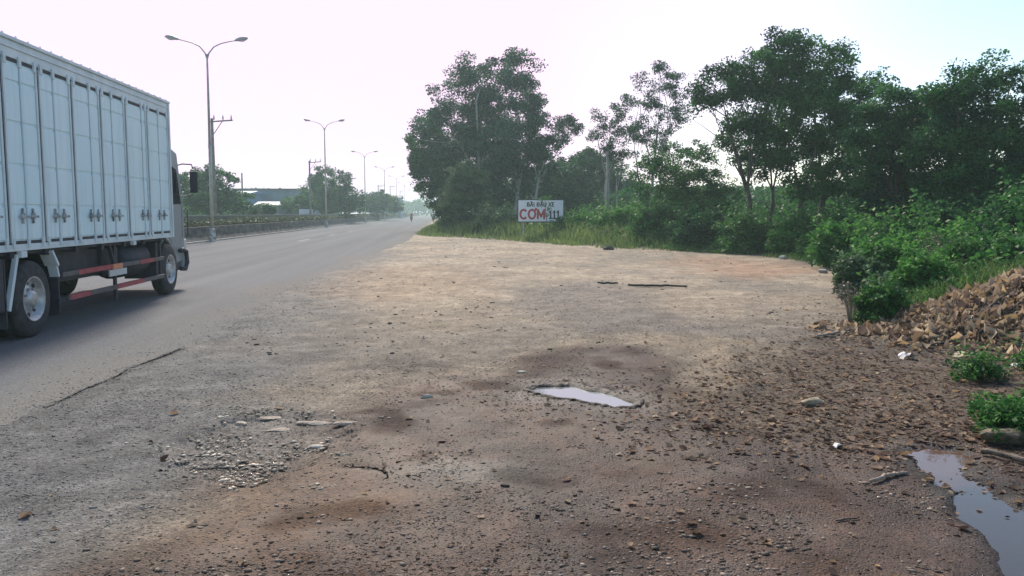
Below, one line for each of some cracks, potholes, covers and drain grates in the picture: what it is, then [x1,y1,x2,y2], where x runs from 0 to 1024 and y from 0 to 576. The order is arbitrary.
pothole [523,382,644,409]
pothole [159,410,358,485]
crack [344,462,403,480]
crack [42,348,181,408]
